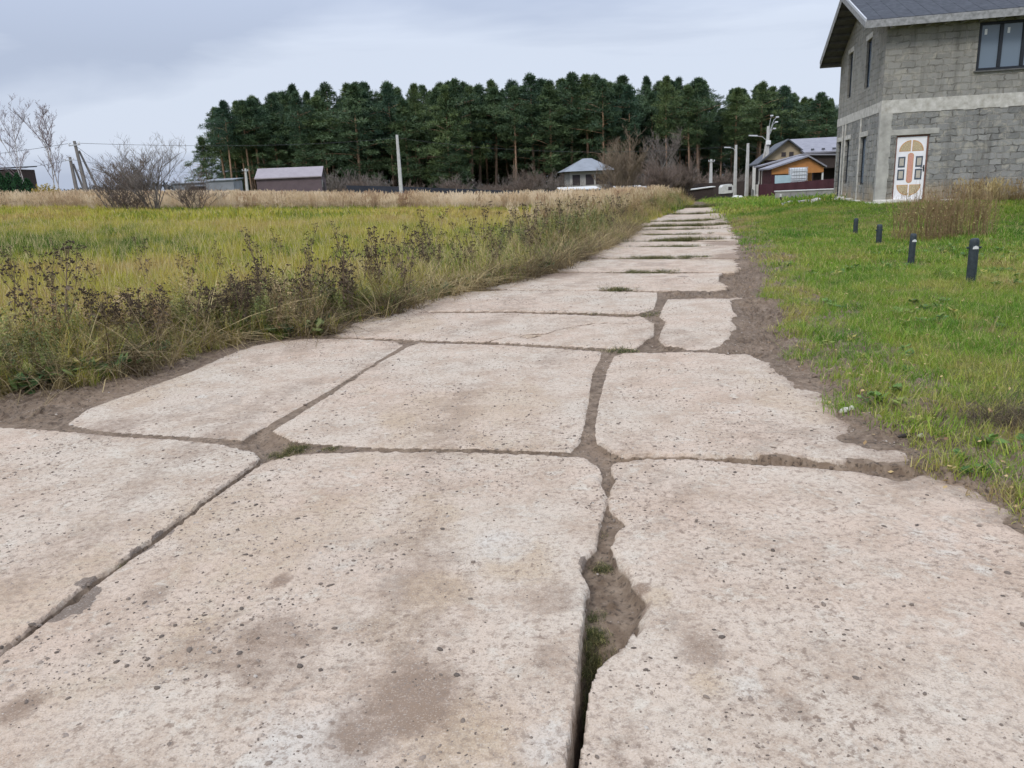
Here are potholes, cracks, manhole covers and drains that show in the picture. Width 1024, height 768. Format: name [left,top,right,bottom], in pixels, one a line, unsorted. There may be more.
crack [264,207,938,768]
